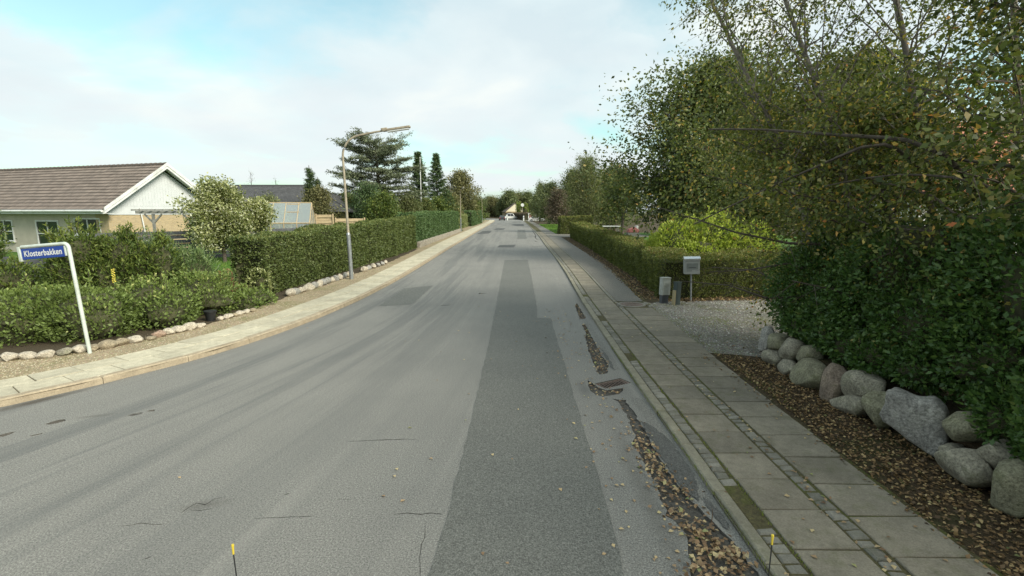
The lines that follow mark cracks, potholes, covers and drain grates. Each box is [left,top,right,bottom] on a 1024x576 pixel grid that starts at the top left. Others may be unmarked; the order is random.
crack [124,497,222,526]
drain grate [596,379,629,392]
